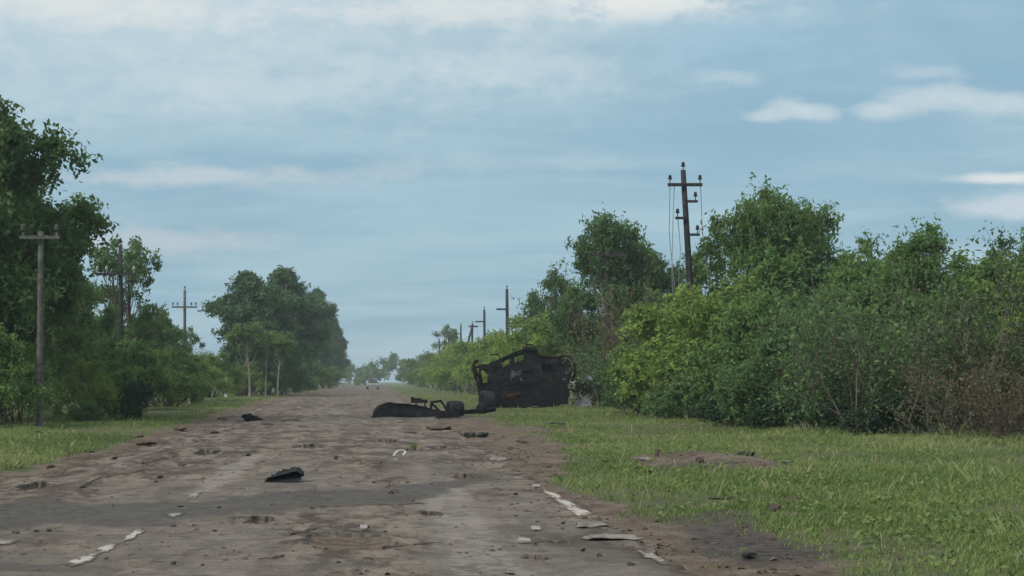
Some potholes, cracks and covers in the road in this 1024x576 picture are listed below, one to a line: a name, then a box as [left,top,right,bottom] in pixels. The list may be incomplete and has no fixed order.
pothole [179,448,239,458]
pothole [0,481,69,495]
